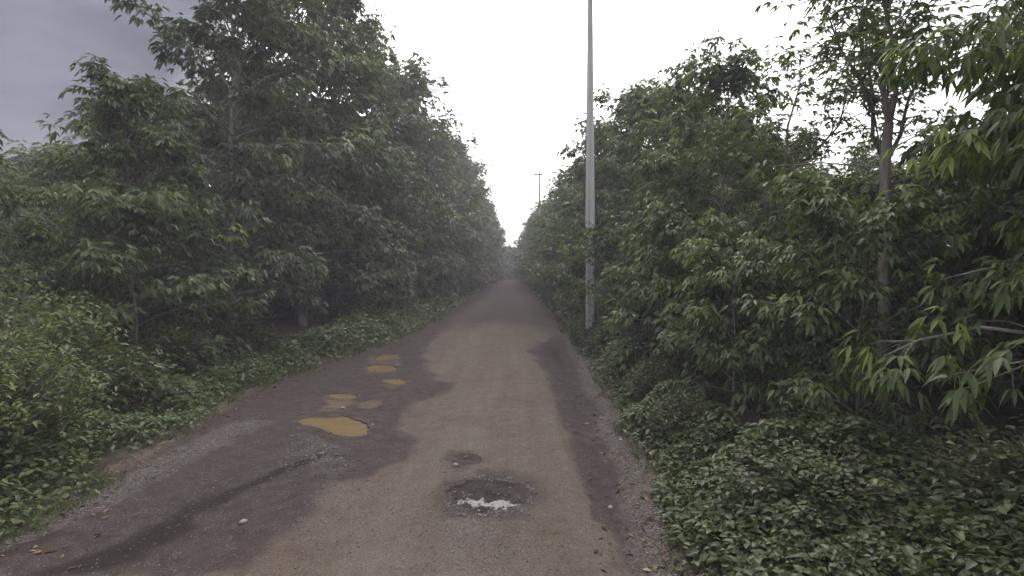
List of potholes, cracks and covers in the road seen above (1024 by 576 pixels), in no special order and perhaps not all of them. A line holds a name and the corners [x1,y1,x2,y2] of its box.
pothole [365,364,398,372]
pothole [298,416,370,436]
pothole [449,453,482,466]
pothole [444,480,528,514]
